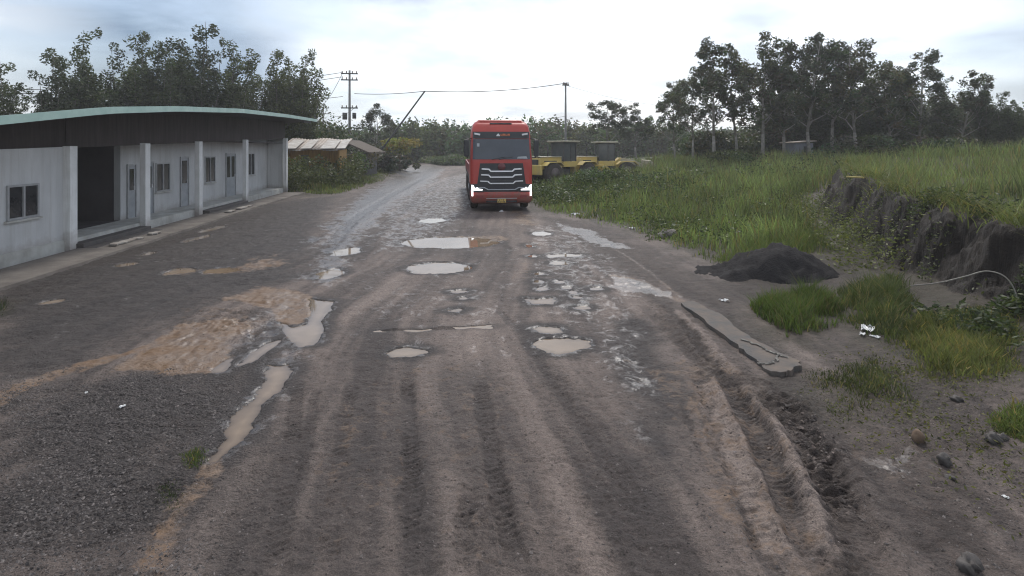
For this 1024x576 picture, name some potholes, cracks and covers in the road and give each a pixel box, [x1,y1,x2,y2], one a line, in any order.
pothole [395,236,505,249]
pothole [381,345,434,359]
pothole [234,337,287,368]
pothole [309,266,350,280]
pothole [523,323,570,335]
pothole [399,261,474,275]
pothole [527,333,597,357]
pothole [520,296,561,306]
pothole [326,246,366,257]
pothole [273,296,339,349]
pothole [198,360,302,468]
pothole [413,216,449,224]
